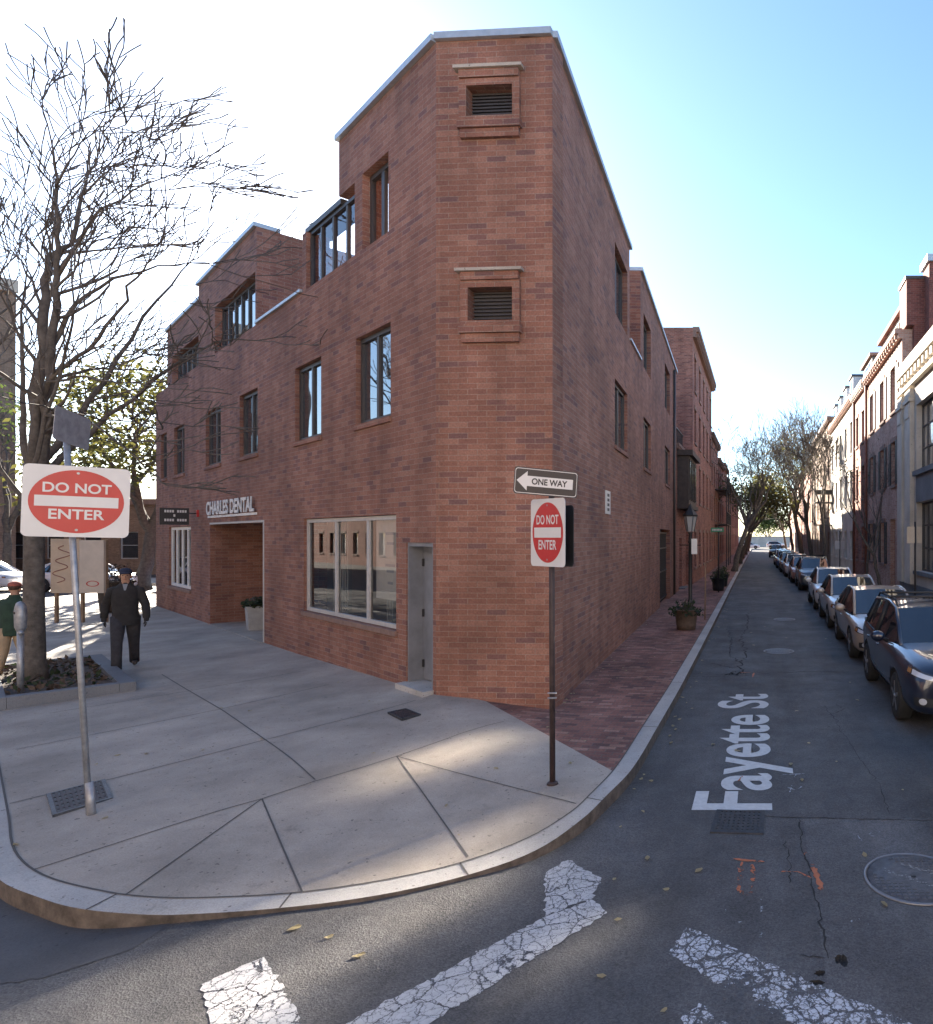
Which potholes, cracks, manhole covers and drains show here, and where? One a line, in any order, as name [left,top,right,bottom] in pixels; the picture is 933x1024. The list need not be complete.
drain grate [710,809,765,835]
drain grate [46,779,113,818]
manhole cover [863,853,933,906]
crack [693,613,838,677]
